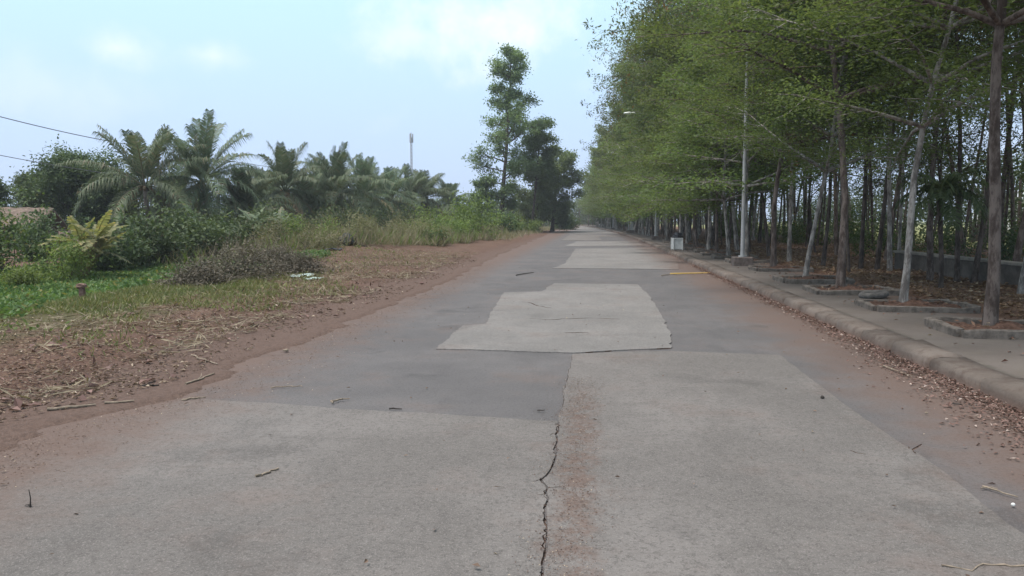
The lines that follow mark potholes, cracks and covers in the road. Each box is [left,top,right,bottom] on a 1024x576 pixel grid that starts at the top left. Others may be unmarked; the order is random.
crack [536,365,571,576]
